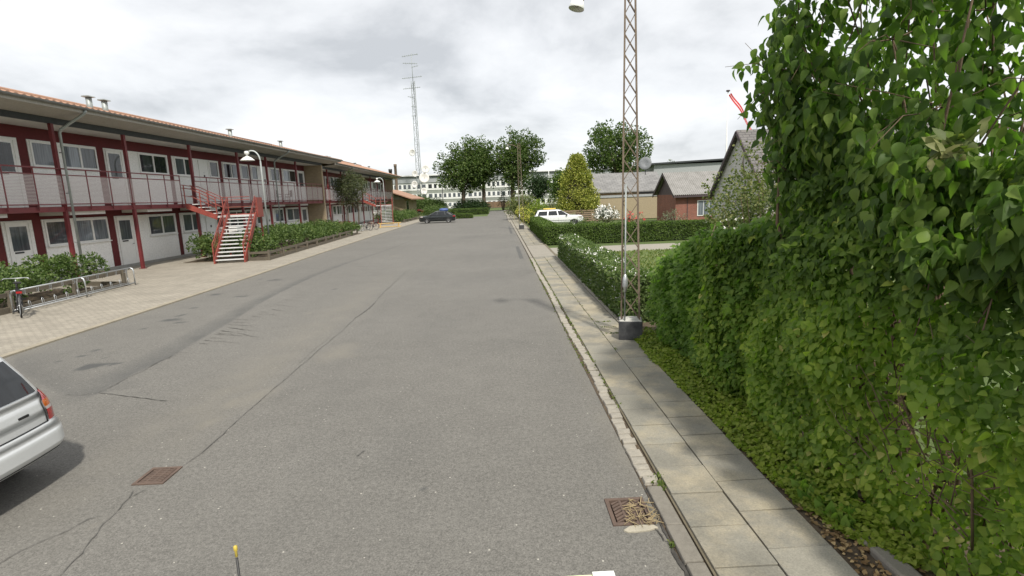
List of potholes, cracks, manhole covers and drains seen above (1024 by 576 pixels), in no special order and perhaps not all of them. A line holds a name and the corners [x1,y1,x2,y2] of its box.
drain grate [604,497,655,526]
drain grate [131,466,183,486]
